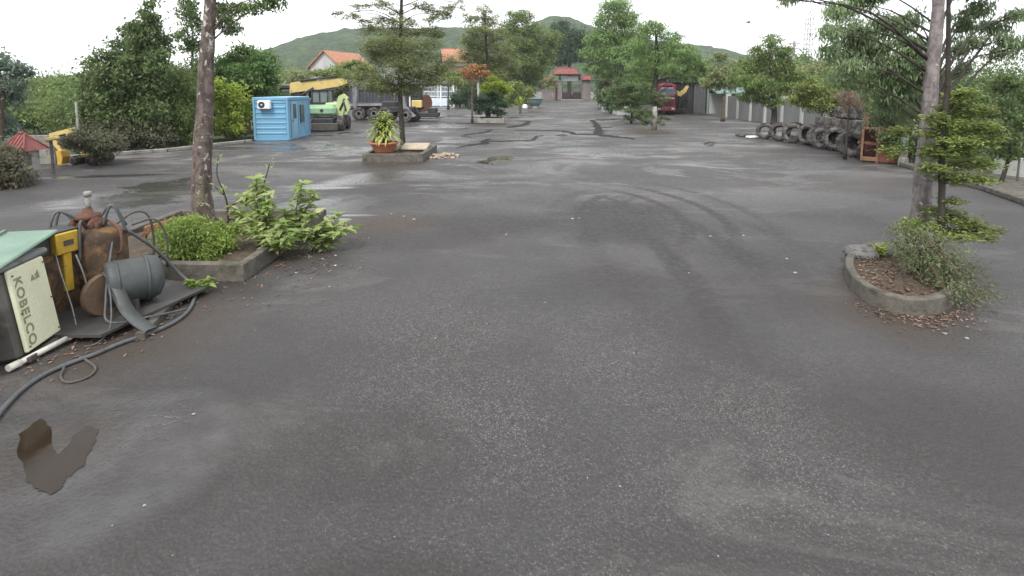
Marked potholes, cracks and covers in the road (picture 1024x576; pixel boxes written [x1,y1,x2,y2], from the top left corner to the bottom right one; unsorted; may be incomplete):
pothole [476,156,514,165]
crack [420,117,636,149]
